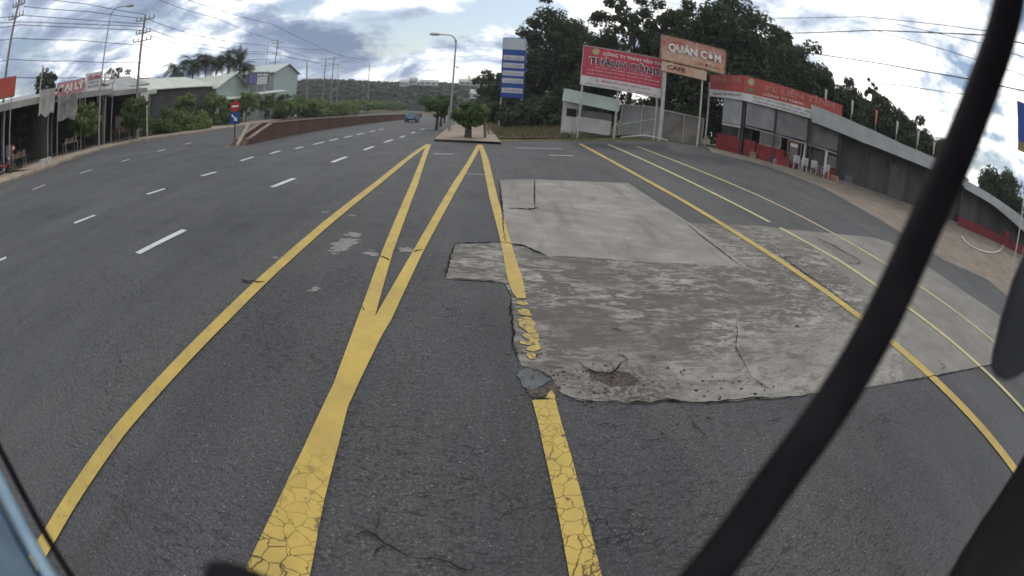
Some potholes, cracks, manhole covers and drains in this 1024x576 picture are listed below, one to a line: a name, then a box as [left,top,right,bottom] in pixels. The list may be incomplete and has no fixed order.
crack [356,514,472,571]
pothole [517,368,552,389]
crack [540,323,810,440]
